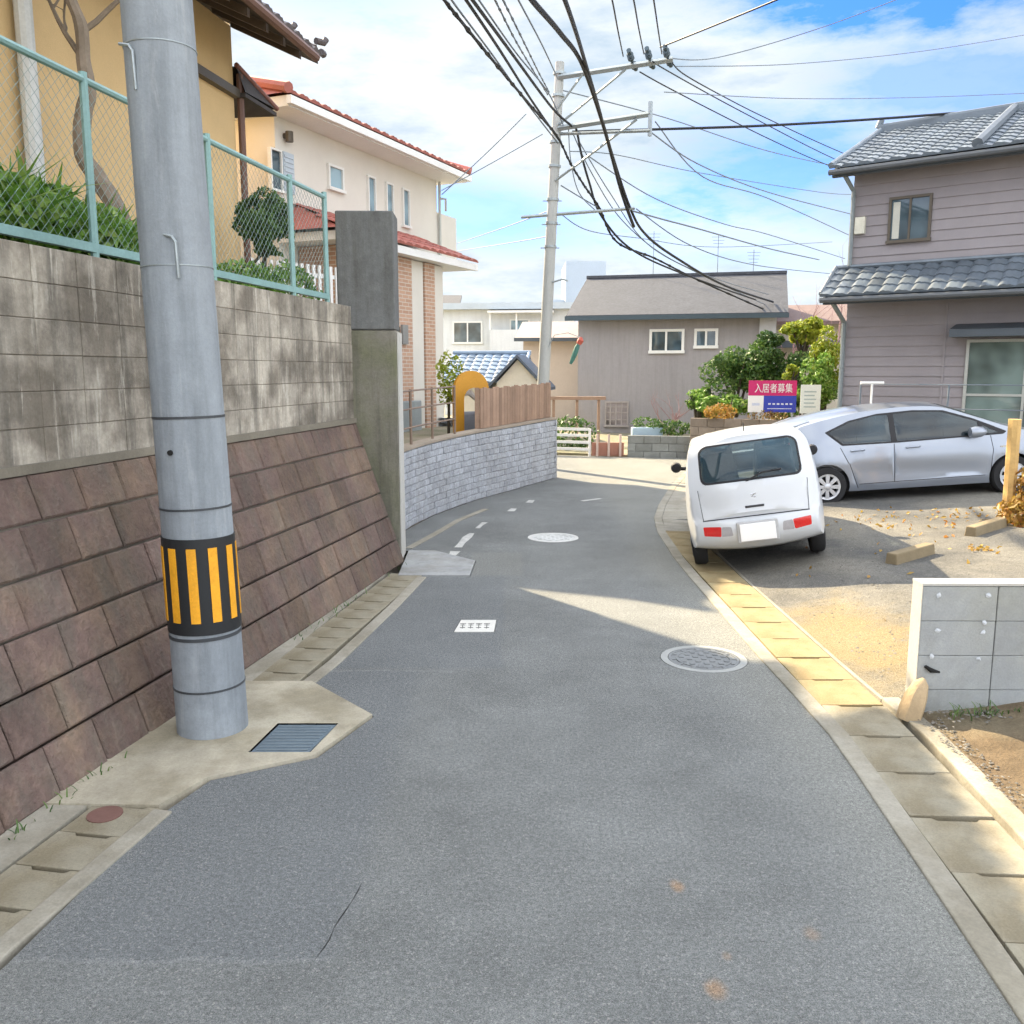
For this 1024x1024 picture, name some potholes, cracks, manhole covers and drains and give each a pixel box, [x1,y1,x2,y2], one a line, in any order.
utility cover [86,806,123,823]
crack [313,883,362,962]
manhole cover [528,533,578,542]
manhole cover [660,645,748,673]
